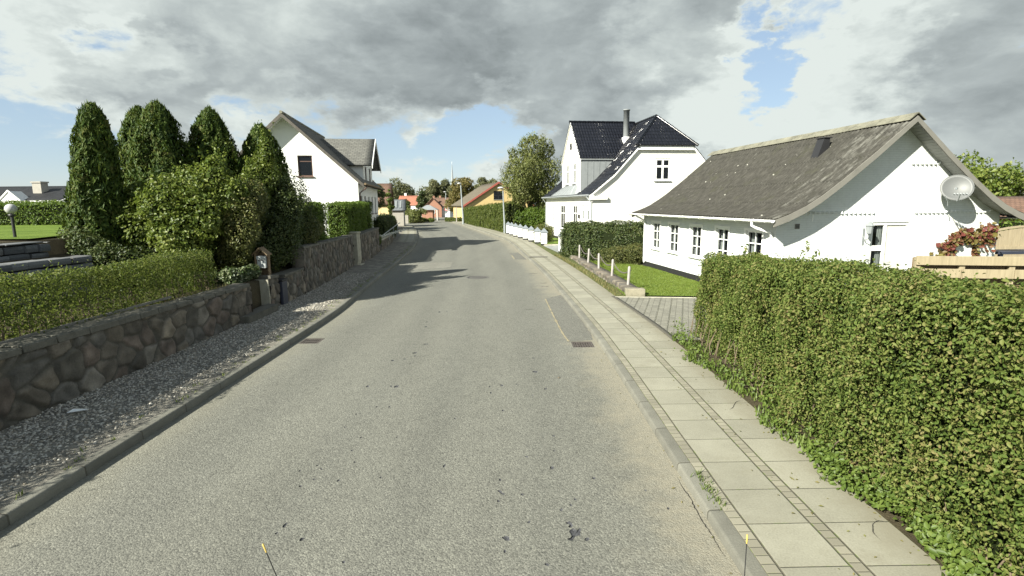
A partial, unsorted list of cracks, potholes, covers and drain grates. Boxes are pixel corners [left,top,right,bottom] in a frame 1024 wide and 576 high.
crack [679,480,725,556]
